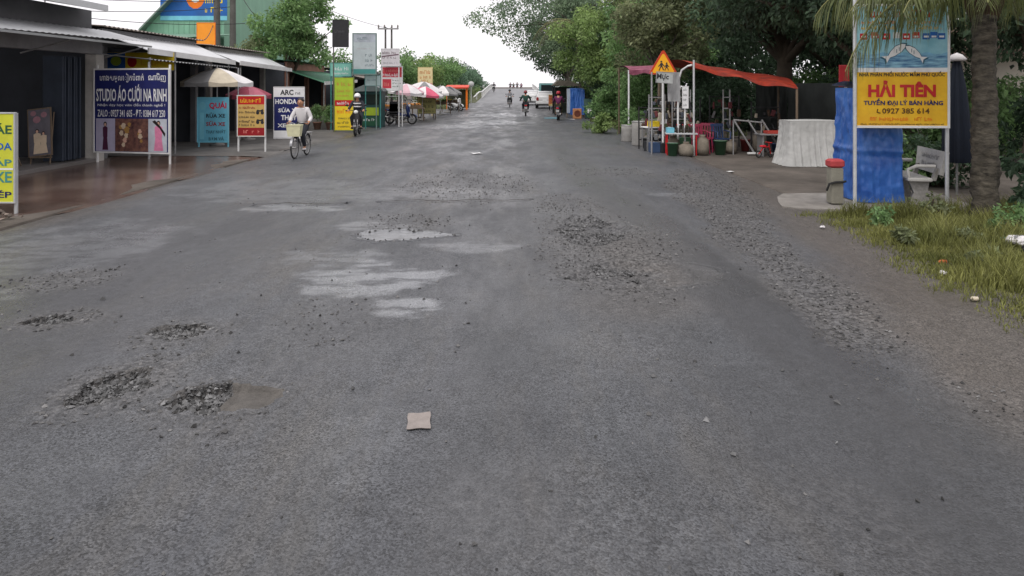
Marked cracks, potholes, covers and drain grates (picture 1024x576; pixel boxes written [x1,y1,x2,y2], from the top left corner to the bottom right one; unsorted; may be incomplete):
pothole [3,311,88,331]
pothole [349,227,462,244]
pothole [141,374,300,425]
pothole [45,362,170,416]
pothole [132,320,227,346]
pothole [545,212,636,249]
